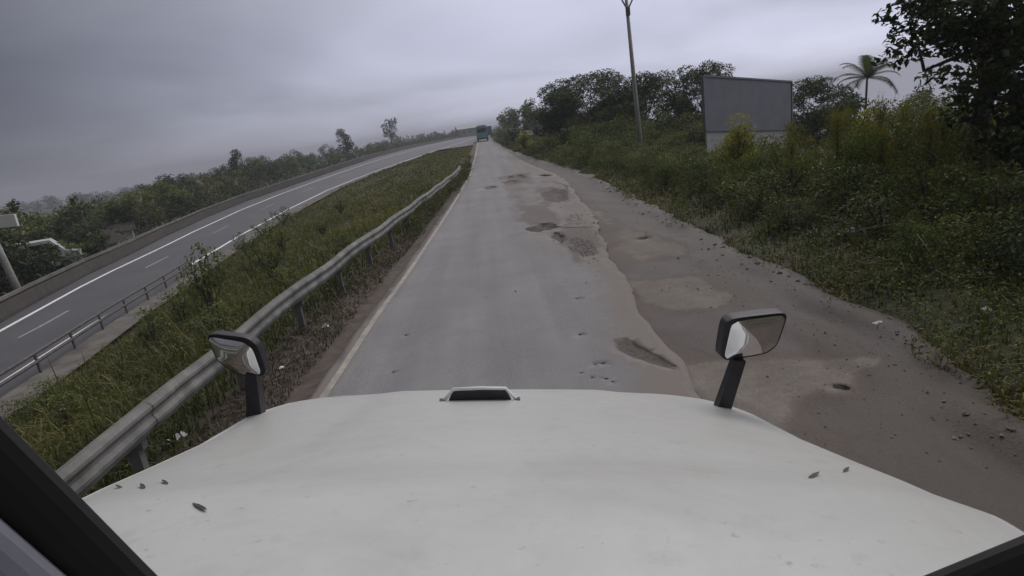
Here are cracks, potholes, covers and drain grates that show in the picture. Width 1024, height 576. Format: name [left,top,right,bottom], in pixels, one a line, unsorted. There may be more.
pothole [525,223,558,232]
pothole [614,339,677,370]
